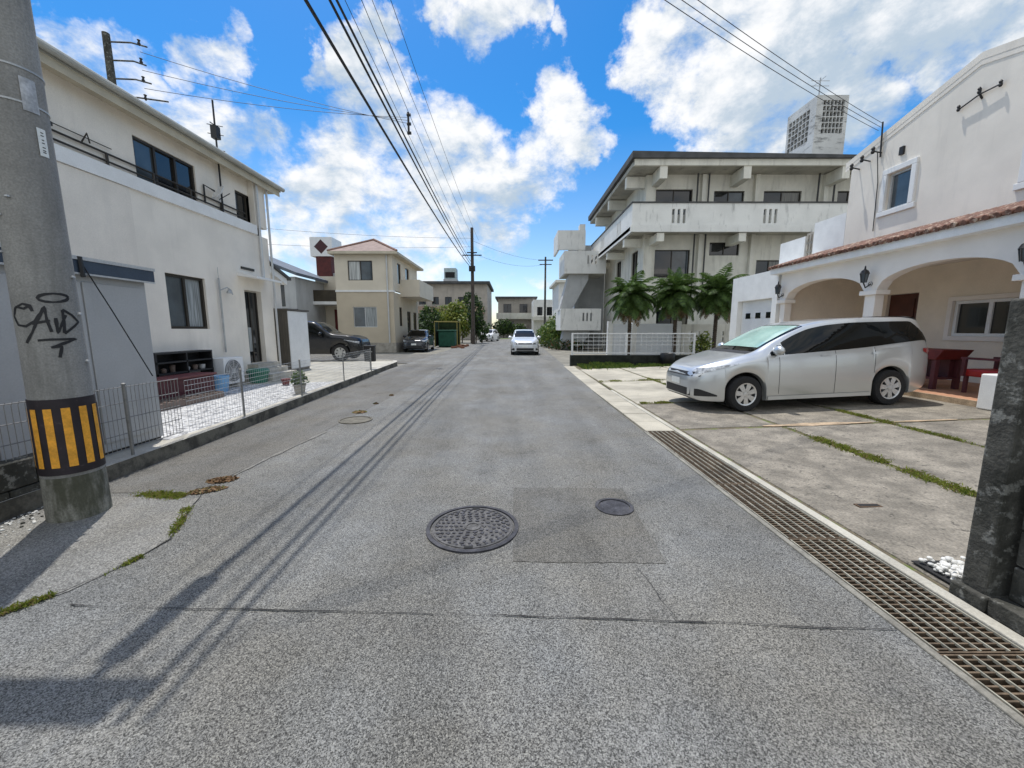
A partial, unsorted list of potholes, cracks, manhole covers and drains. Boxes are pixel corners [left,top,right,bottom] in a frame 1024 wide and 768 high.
manhole cover [338,416,373,424]
drain grate [789,539,1024,654]
drain grate [940,654,1024,718]
drain grate [674,452,758,484]
drain grate [716,484,847,539]
manhole cover [426,505,519,554]
drain grate [646,431,707,452]
utility cover [595,498,634,516]
